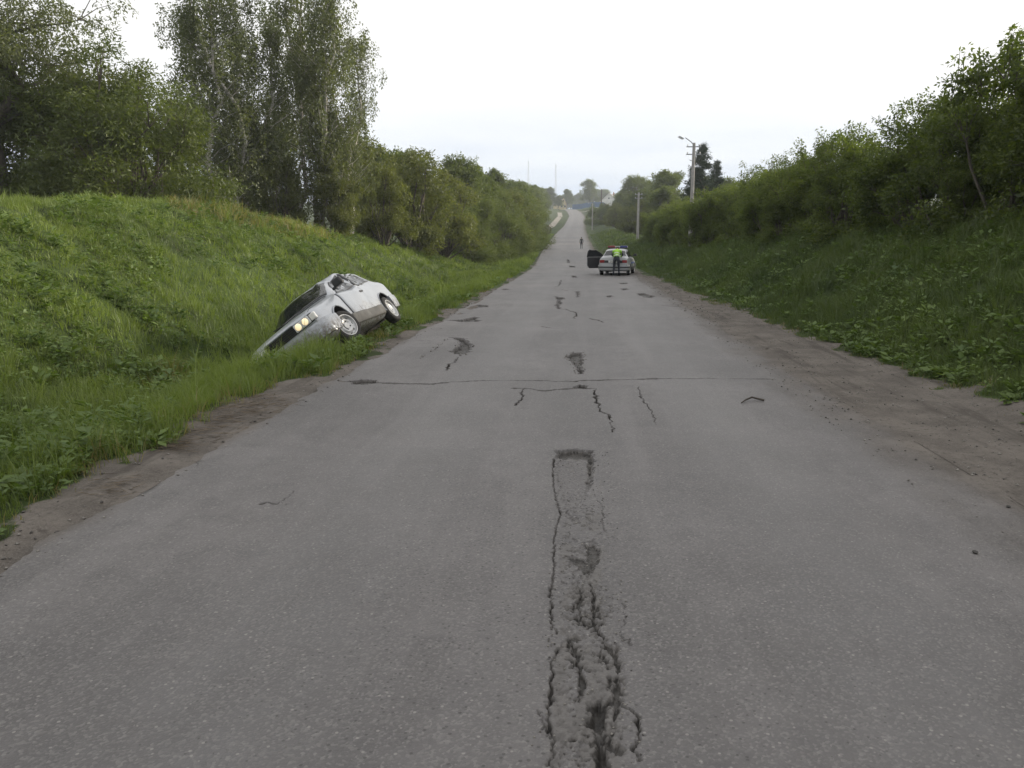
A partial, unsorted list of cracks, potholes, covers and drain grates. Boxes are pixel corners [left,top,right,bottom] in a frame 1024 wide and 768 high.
pothole [556,351,594,375]
crack [336,327,783,436]
pothole [540,445,611,514]
crack [531,309,612,330]
crack [241,487,313,510]
pothole [439,336,483,358]
pothole [553,538,622,583]
